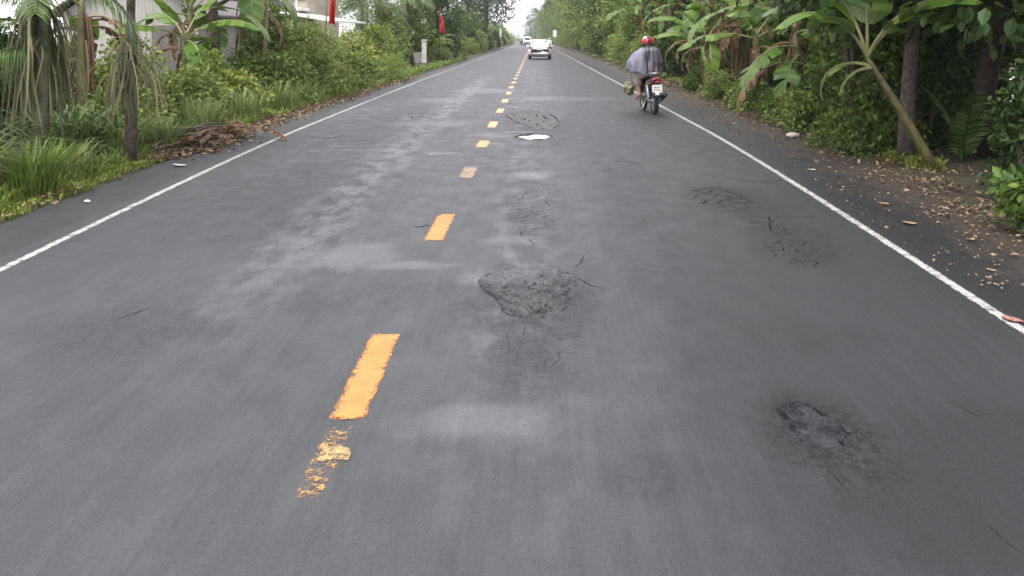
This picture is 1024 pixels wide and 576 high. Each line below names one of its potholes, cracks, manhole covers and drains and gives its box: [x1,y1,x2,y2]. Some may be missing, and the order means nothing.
pothole [478,268,580,319]
pothole [506,111,560,129]
crack [946,401,990,419]
crack [508,189,554,243]
pothole [775,401,850,449]
crack [490,322,584,367]
crack [814,460,853,495]
crack [690,179,835,267]
crack [980,520,1024,555]
